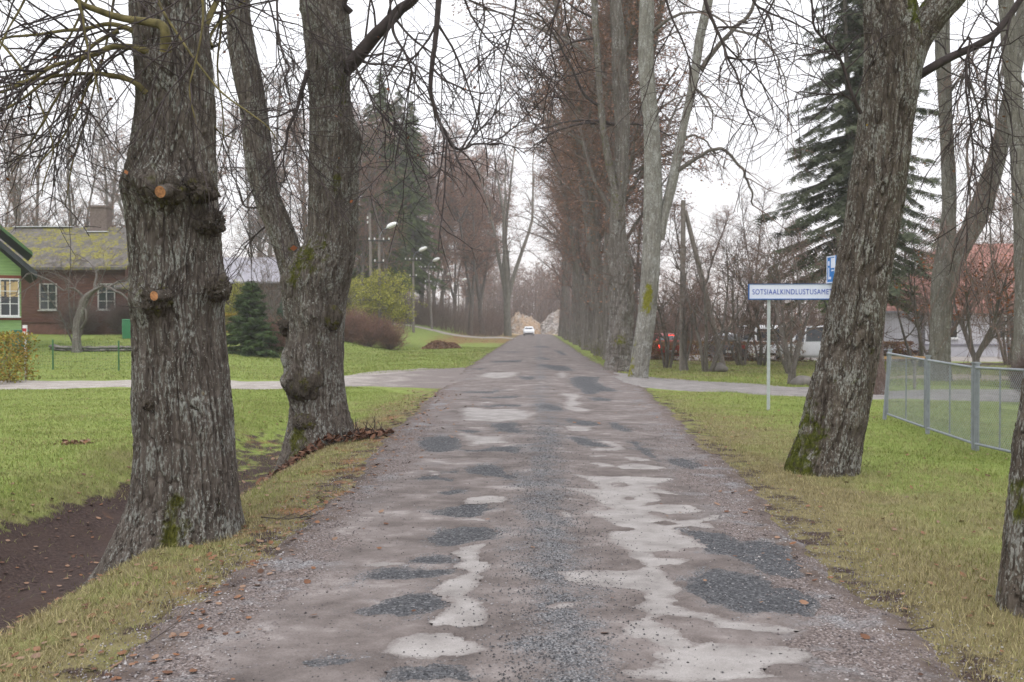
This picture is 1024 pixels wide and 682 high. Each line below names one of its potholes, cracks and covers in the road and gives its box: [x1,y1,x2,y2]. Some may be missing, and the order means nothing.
pothole [428,526,499,546]
pothole [417,436,462,452]
pothole [680,530,806,579]
pothole [570,376,620,394]
pothole [432,503,491,518]
pothole [354,592,451,617]
pothole [465,465,518,479]
pothole [365,567,456,580]
pothole [685,568,821,617]
